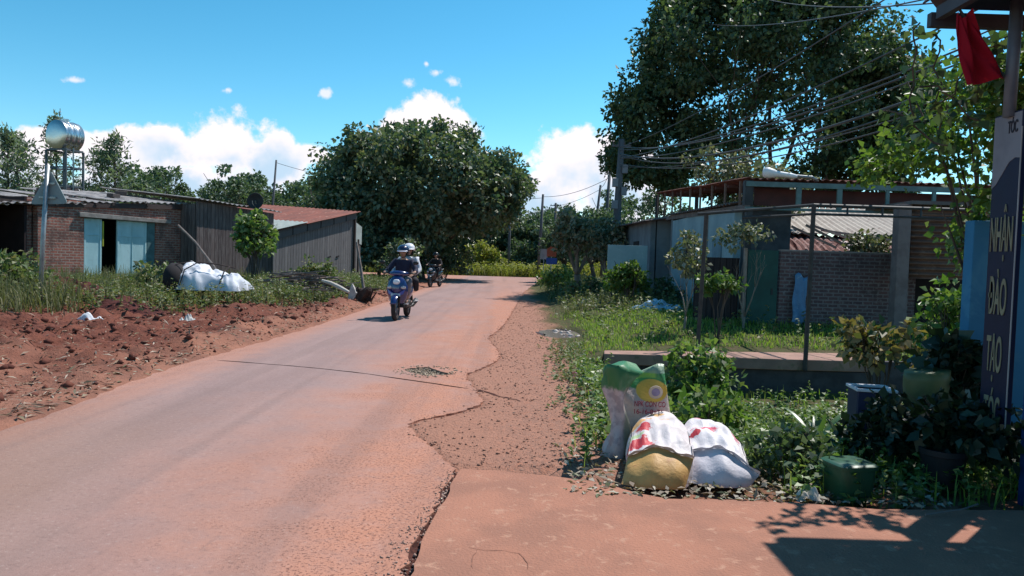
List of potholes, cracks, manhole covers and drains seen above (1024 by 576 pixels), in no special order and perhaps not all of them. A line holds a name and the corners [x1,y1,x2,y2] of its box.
crack [219,360,520,401]
crack [366,470,528,576]
pothole [393,365,462,378]
